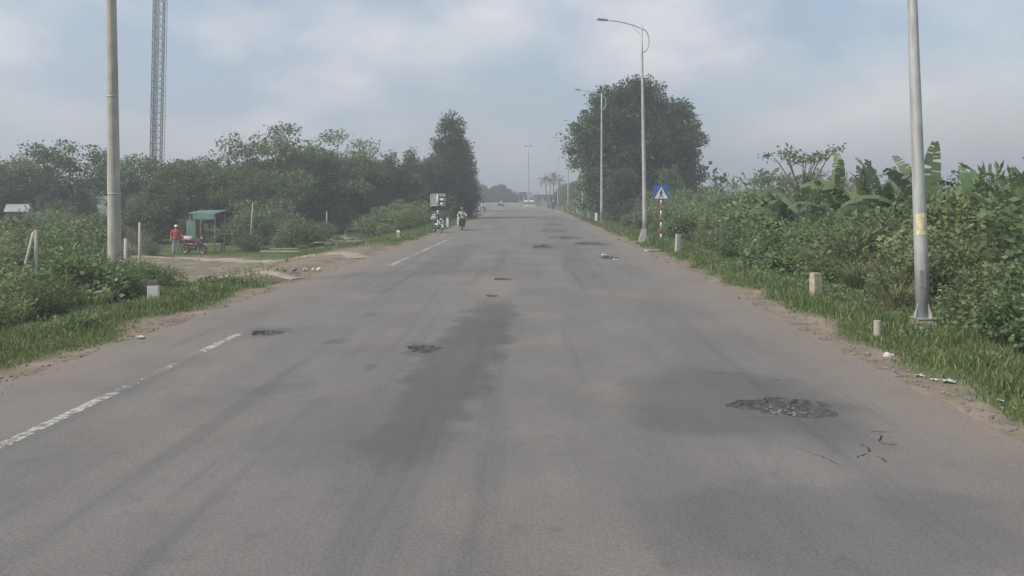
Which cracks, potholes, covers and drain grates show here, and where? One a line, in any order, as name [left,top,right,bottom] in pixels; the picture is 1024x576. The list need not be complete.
pothole [726,397,838,419]
pothole [407,345,442,354]
crack [795,431,898,469]
